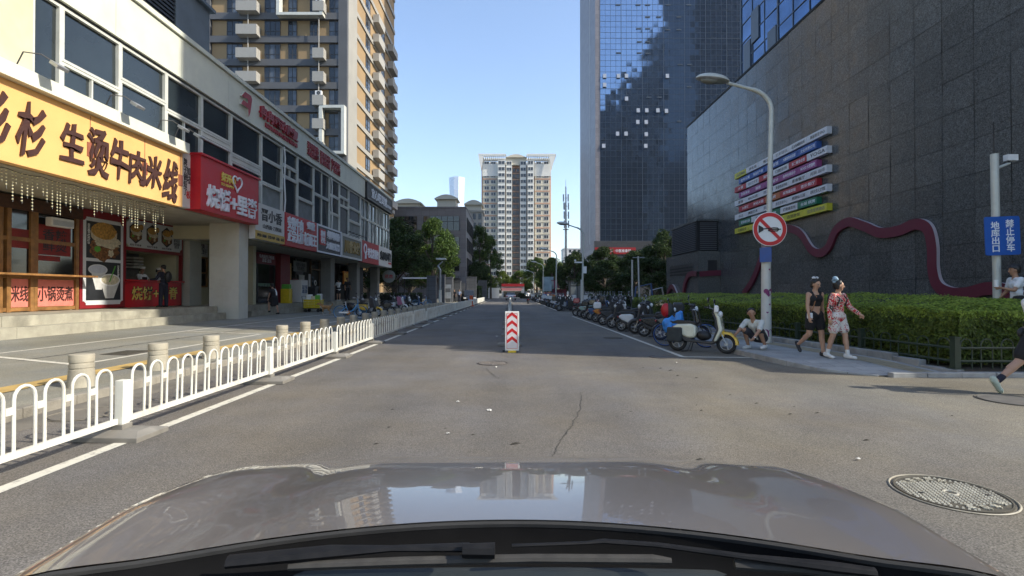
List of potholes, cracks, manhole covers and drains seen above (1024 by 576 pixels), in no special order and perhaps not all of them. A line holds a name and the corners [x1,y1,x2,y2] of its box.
manhole cover [888,474,1023,516]
